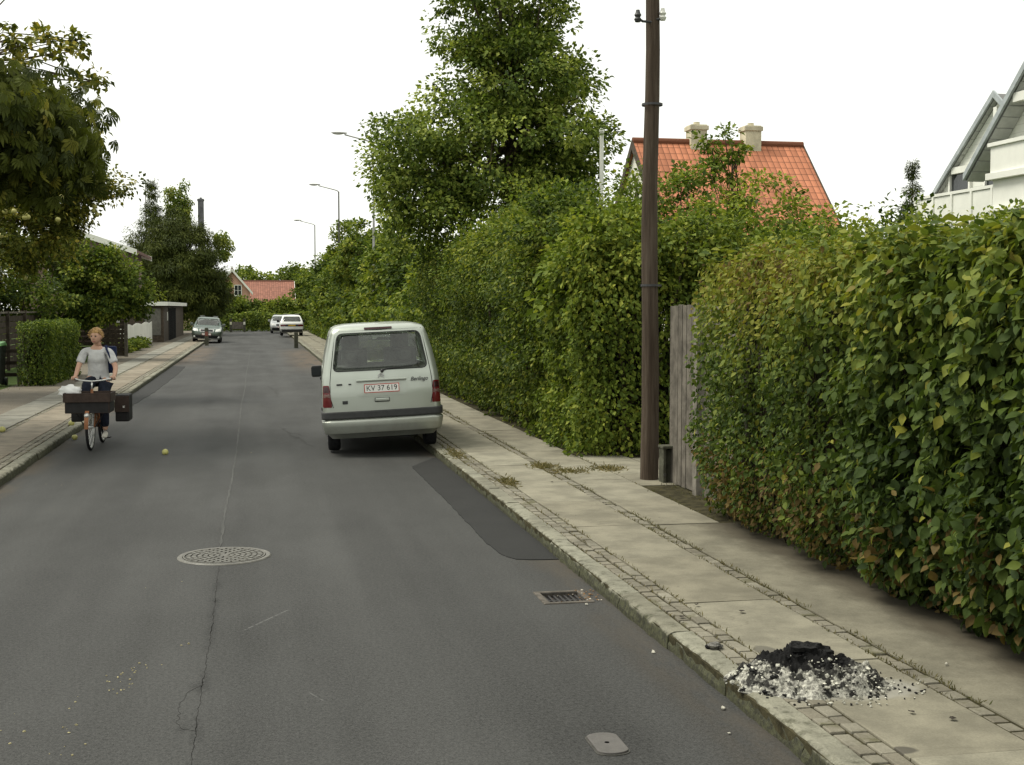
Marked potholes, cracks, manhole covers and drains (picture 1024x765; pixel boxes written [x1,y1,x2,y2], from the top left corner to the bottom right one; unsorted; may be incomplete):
manhole cover [177,547,271,566]
utility cover [585,732,630,756]
crack [177,568,219,765]
drain grate [533,589,602,605]
